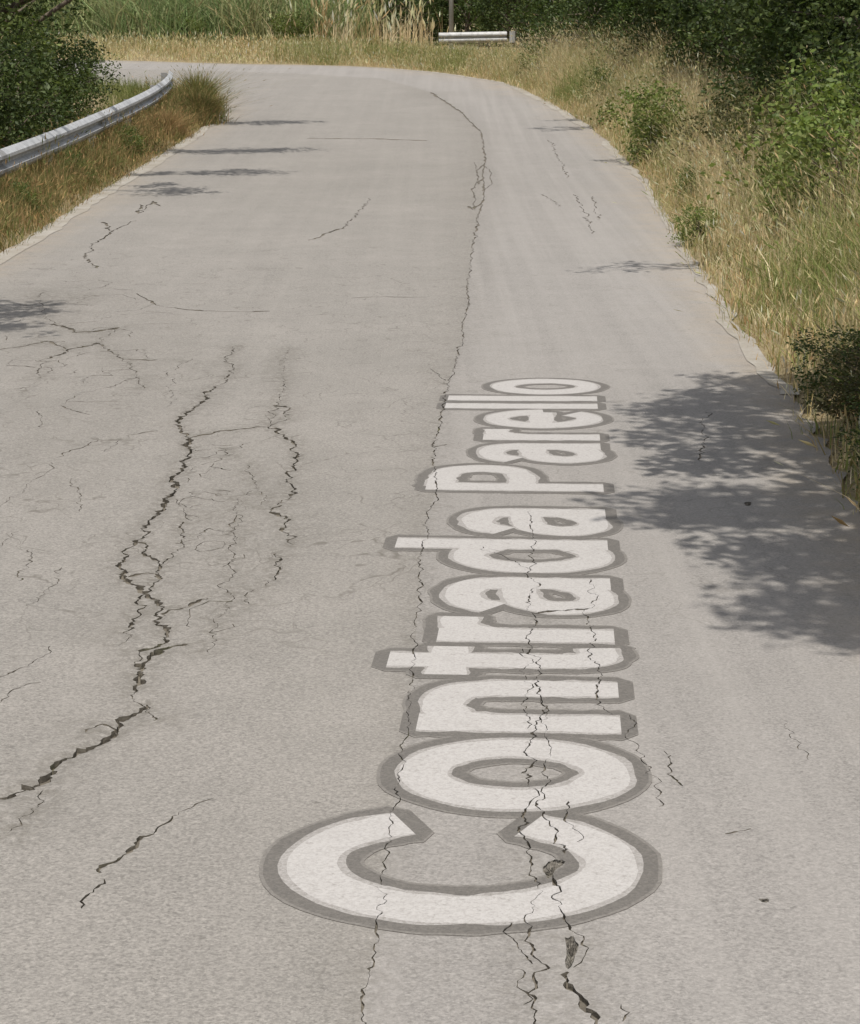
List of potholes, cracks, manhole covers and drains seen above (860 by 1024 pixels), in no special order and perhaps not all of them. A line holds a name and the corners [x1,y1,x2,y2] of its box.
crack [83,201,160,268]
crack [585,581,683,807]
crack [79,799,211,909]
crack [360,92,492,1024]
crack [541,194,601,233]
crack [0,280,300,832]
crack [483,516,600,1024]
crack [310,198,370,240]
